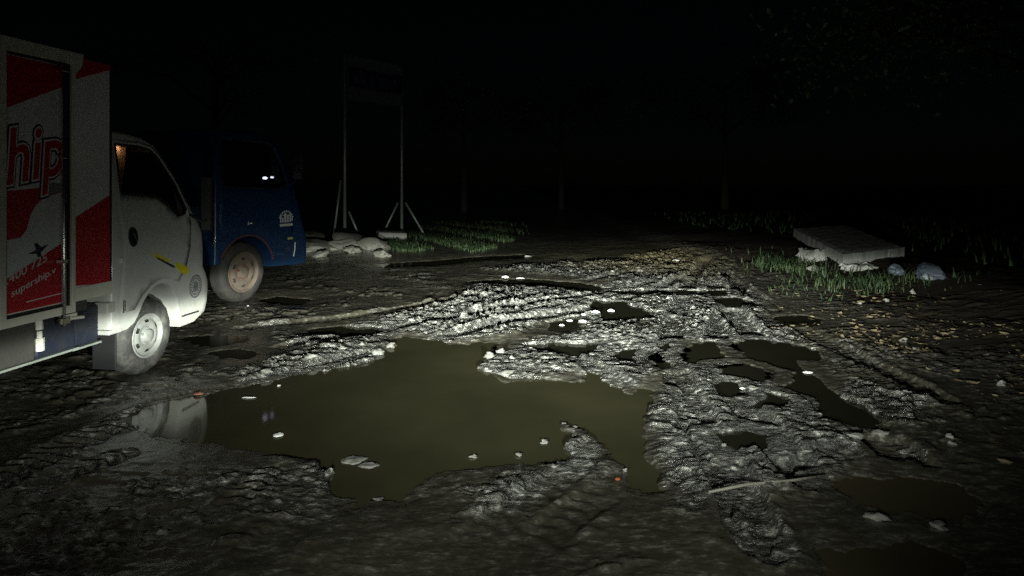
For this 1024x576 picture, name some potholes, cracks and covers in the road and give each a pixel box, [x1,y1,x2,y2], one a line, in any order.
pothole [542,314,589,334]
pothole [820,471,999,527]
pothole [708,380,748,399]
pothole [583,296,663,321]
pothole [111,330,675,514]
pothole [711,424,778,452]
pothole [672,338,749,368]
pothole [712,362,770,382]
pothole [256,296,313,305]
pothole [725,337,886,430]
